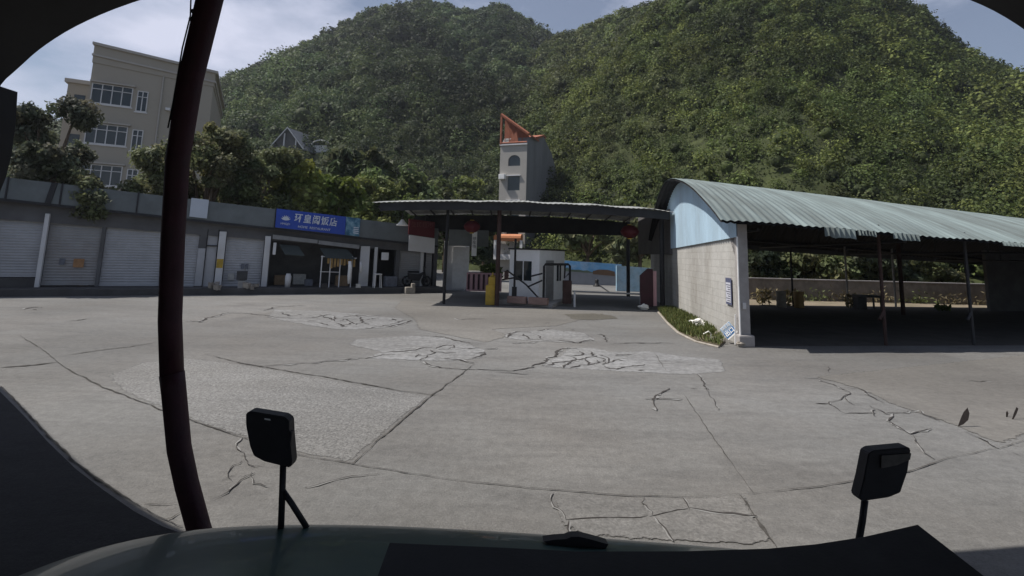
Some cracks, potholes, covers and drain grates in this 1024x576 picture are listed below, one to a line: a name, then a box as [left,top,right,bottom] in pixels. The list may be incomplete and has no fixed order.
crack [216,437,270,498]
crack [646,388,681,411]
crack [550,493,757,541]
crack [698,374,719,410]
crack [817,367,1000,459]
